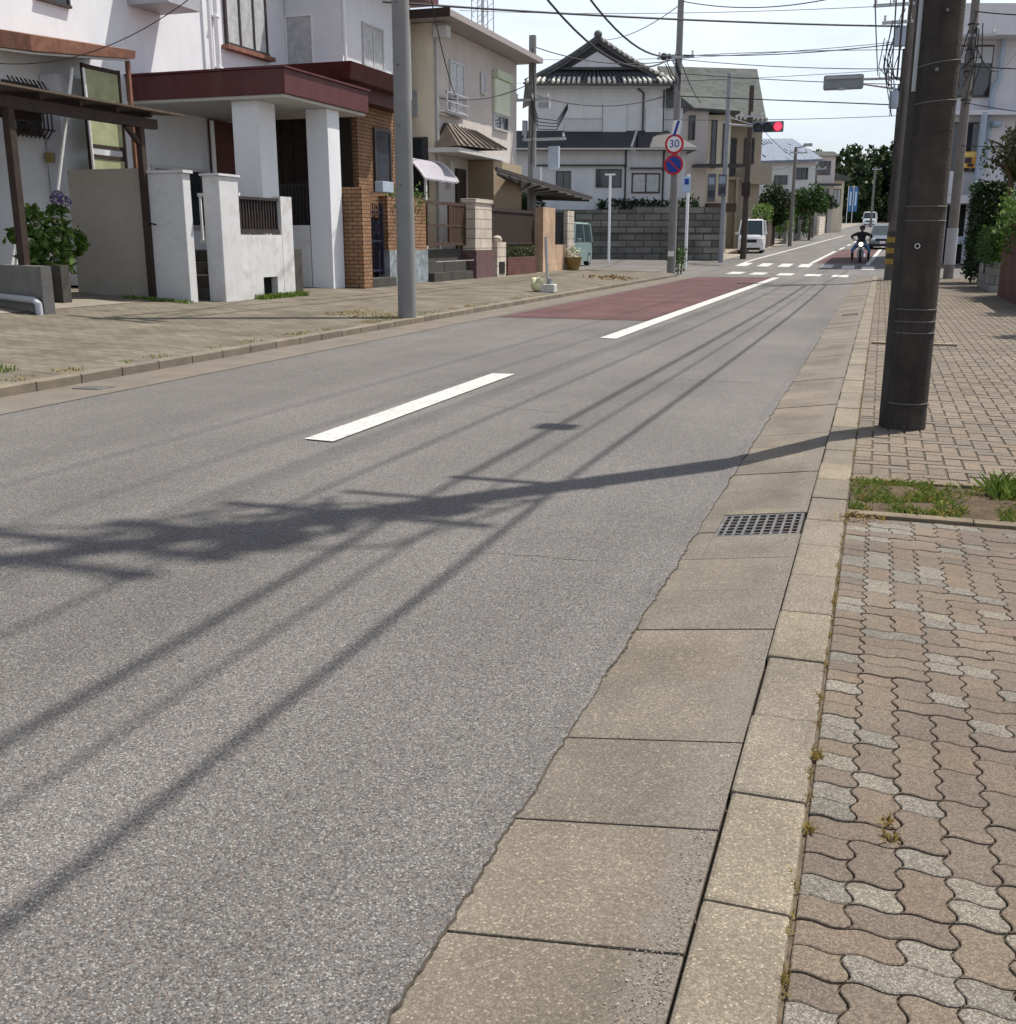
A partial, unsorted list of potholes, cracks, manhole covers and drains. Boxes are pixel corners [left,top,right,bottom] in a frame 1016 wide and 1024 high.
drain grate [713,513,805,537]
